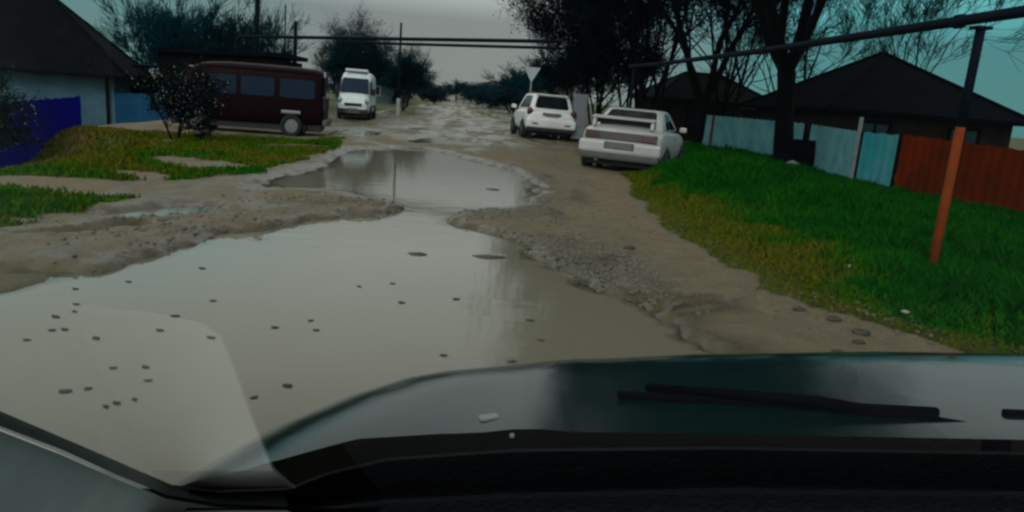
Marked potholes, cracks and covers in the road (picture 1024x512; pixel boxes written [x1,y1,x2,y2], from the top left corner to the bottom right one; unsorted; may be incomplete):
pothole [235,146,555,223]
pothole [0,206,757,354]
